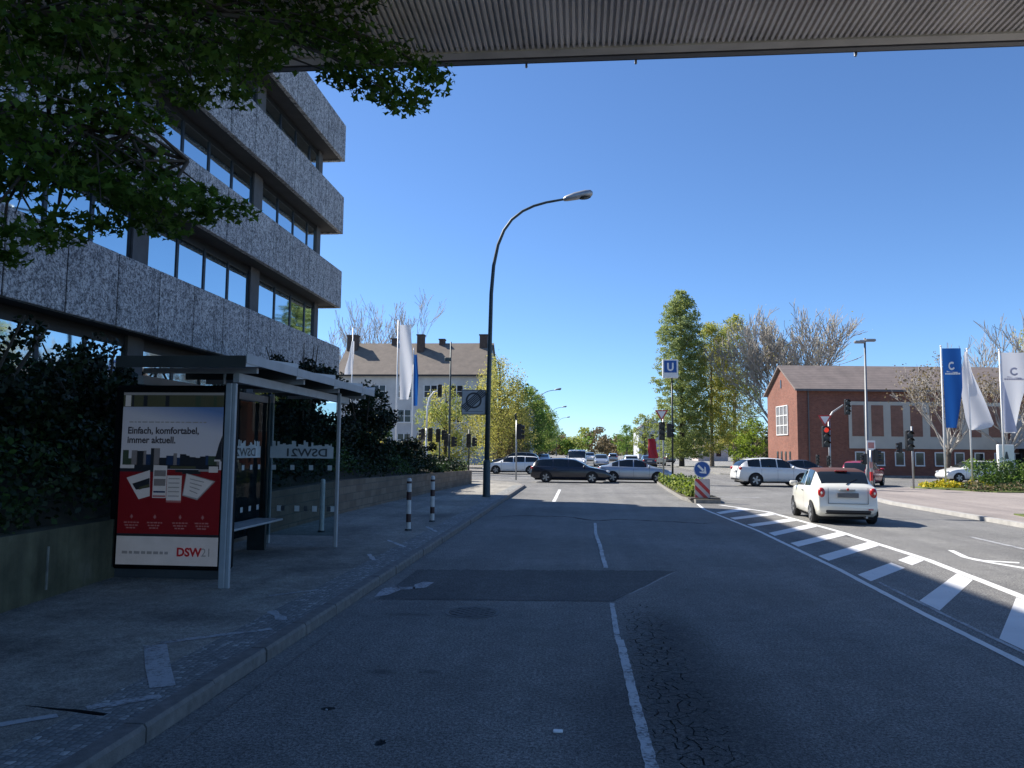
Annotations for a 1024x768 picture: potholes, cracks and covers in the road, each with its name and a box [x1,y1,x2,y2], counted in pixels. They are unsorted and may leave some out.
crack [25,705,108,716]
manhole cover [444,606,501,618]
